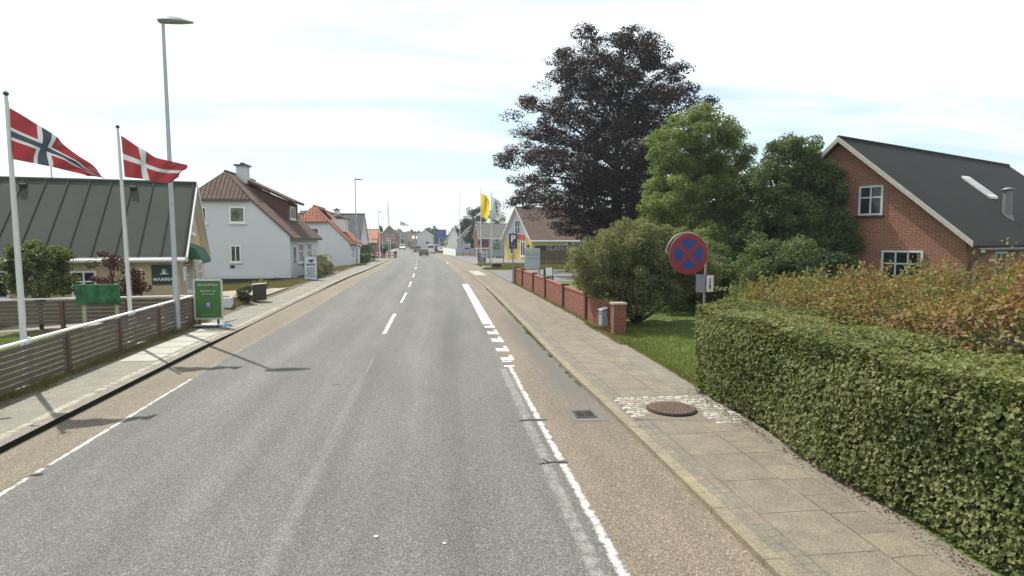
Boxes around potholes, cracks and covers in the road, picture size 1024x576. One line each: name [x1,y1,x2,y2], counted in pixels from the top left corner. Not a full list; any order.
manhole cover [647,401,697,417]
drain grate [572,410,597,418]
